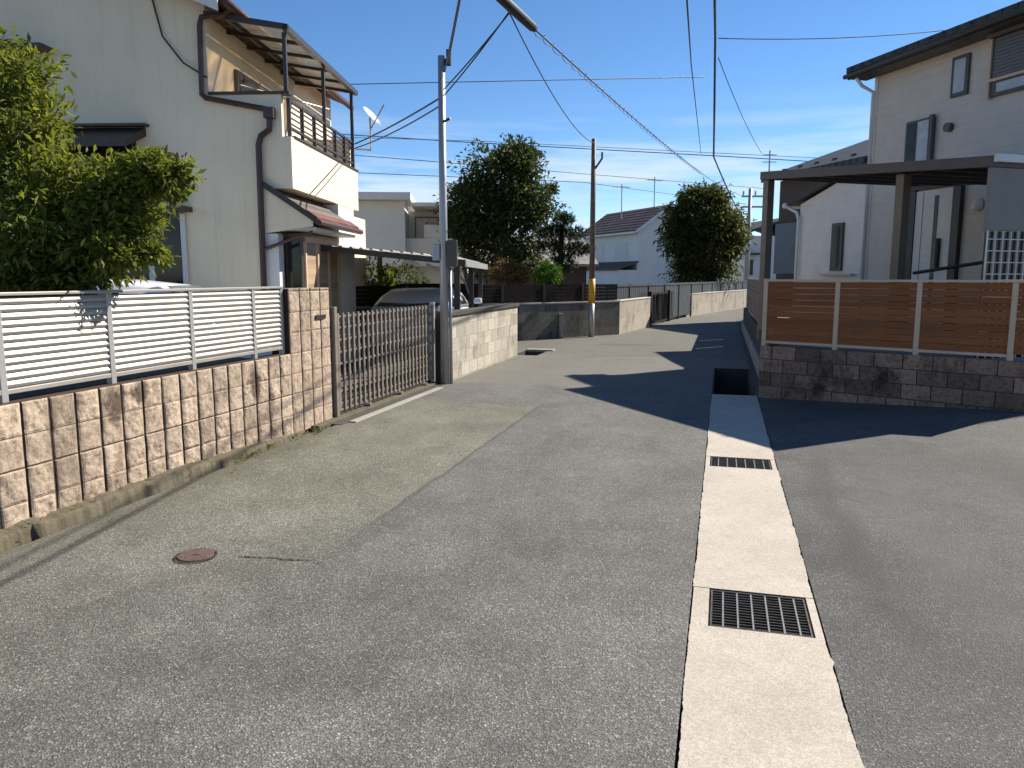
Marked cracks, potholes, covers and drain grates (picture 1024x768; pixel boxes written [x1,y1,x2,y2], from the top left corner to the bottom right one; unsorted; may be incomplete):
drain grate [710,590,814,638]
drain grate [711,457,772,470]
manhole cover [173,548,218,563]
